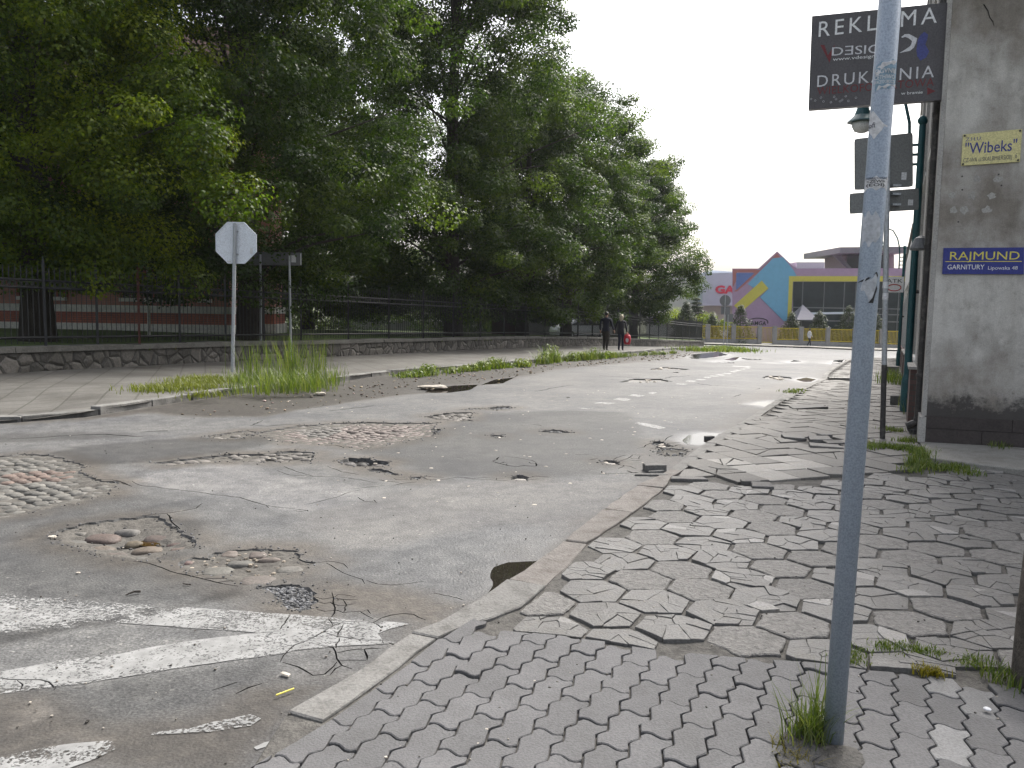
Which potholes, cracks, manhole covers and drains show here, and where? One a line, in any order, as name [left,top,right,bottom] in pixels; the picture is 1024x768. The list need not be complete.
pothole [201,430,263,439]
pothole [649,447,693,457]
pothole [0,453,124,518]
pothole [149,449,316,466]
pothole [334,456,392,468]
crack [280,561,462,676]
pothole [47,513,205,563]
pothole [170,545,316,587]
pothole [421,412,478,422]
pothole [250,581,336,612]
crack [132,457,541,529]
pothole [251,421,442,450]
